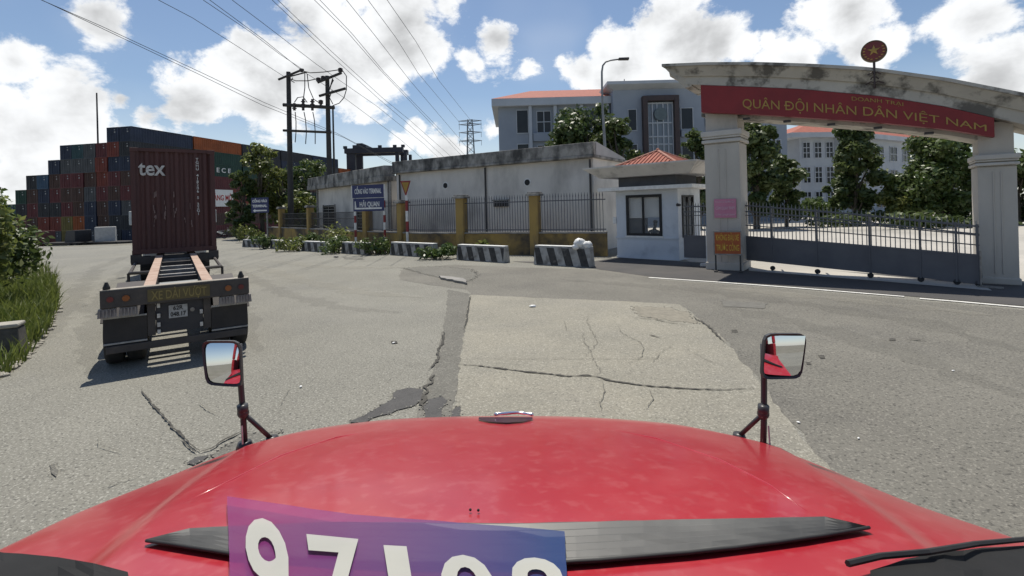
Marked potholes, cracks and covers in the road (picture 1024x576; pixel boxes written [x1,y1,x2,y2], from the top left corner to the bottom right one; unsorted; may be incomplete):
crack [141,389,248,452]
crack [464,316,742,411]
